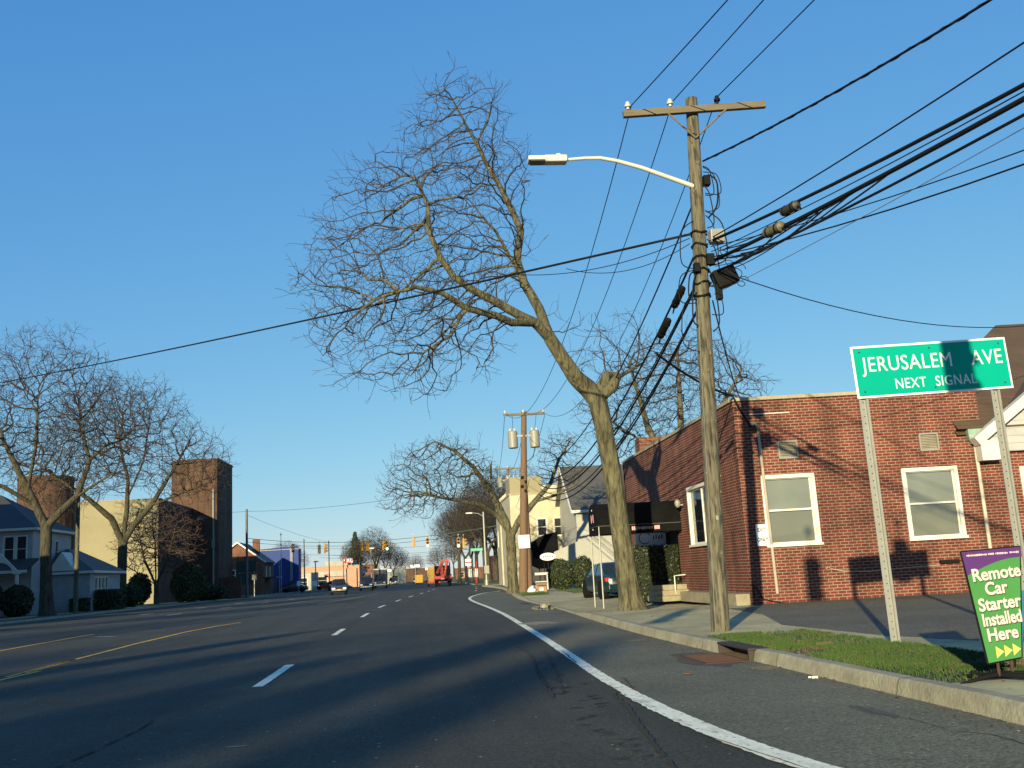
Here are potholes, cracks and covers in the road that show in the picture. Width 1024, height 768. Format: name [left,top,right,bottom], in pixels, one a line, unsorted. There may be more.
crack [55,719,155,768]
crack [516,646,677,768]
drain grate [670,641,770,667]
